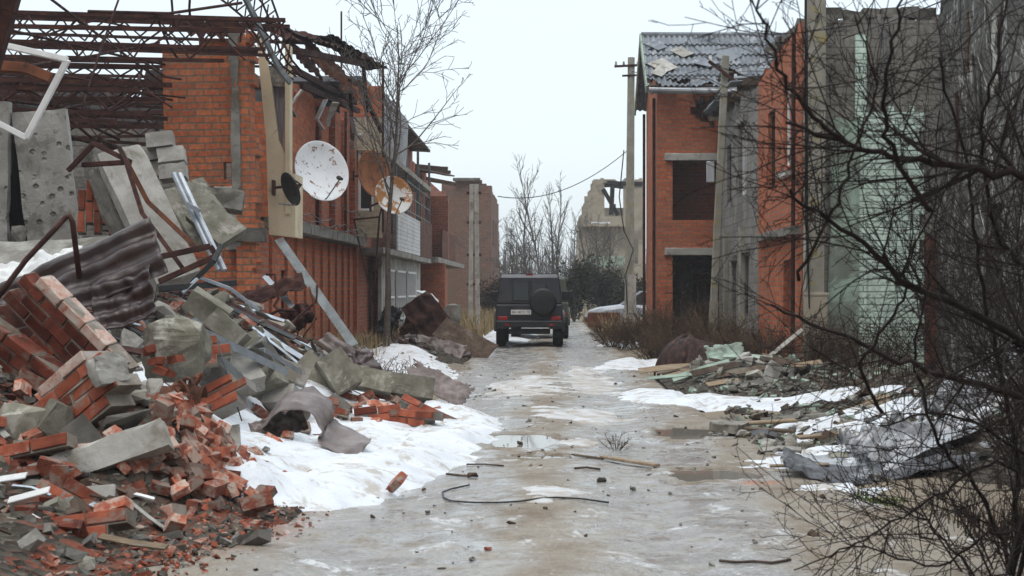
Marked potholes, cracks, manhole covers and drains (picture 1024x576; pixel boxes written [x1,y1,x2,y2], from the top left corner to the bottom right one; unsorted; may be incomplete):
pothole [476,430,584,455]
